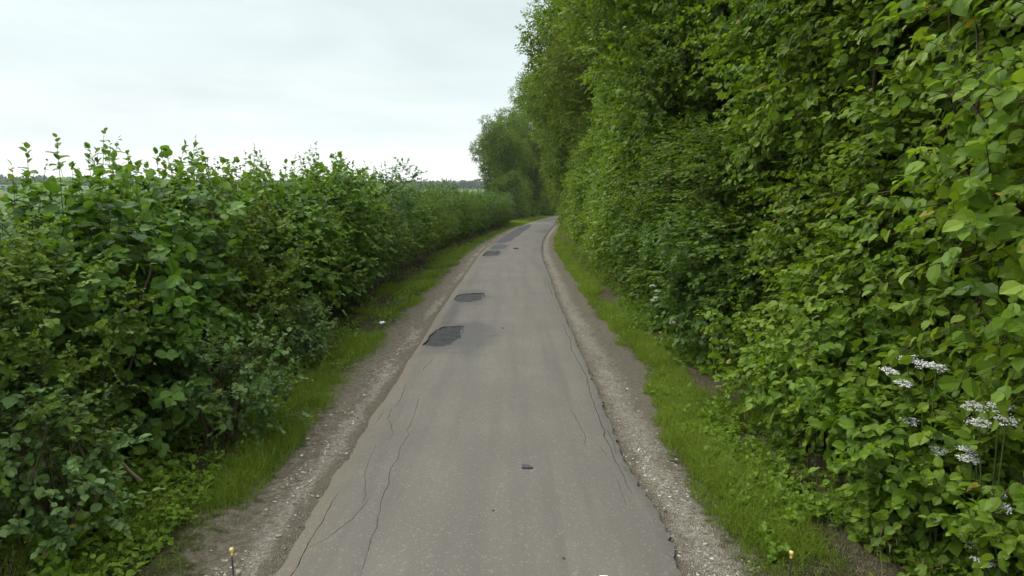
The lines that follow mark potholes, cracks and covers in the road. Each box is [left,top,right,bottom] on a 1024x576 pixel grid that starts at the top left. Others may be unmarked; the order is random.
crack [563,325,632,506]
crack [291,383,419,576]
